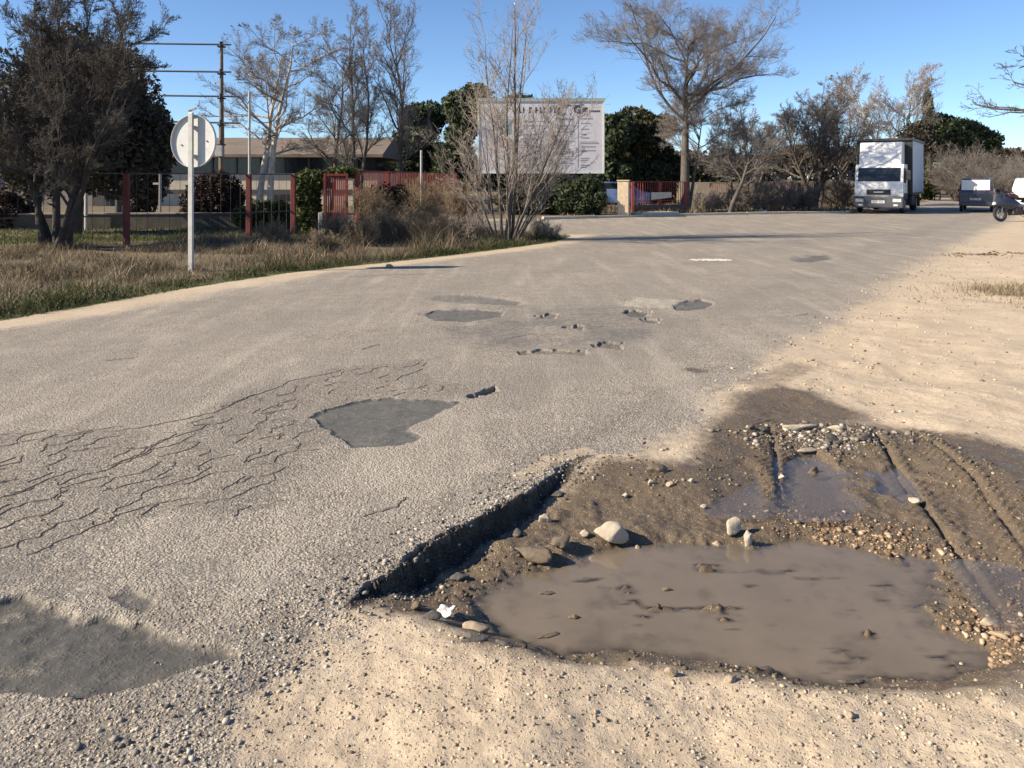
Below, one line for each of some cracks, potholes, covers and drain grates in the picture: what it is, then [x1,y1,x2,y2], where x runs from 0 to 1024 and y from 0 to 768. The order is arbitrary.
pothole [590,340,625,350]
pothole [466,386,498,398]
crack [0,362,445,556]
pothole [534,312,558,320]
pothole [344,388,1024,701]
pothole [516,348,591,356]
pothole [622,309,654,318]
